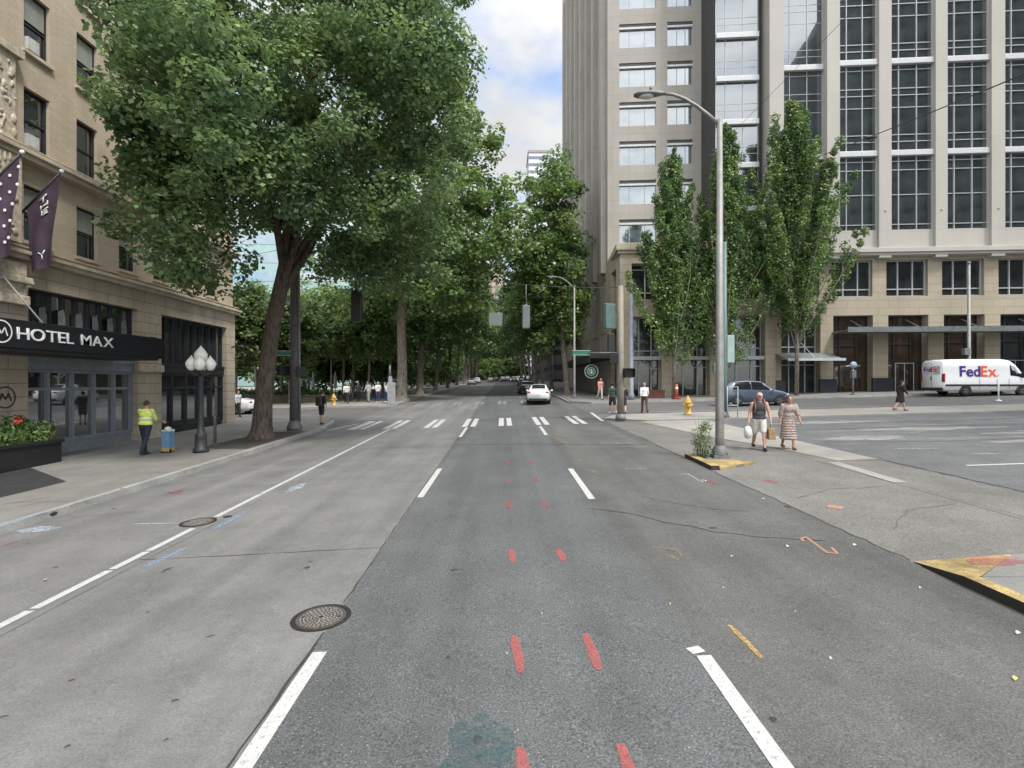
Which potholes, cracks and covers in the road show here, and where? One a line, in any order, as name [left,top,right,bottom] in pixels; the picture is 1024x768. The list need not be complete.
manhole cover [290,604,351,632]
crack [588,470,910,560]
manhole cover [179,517,217,527]
